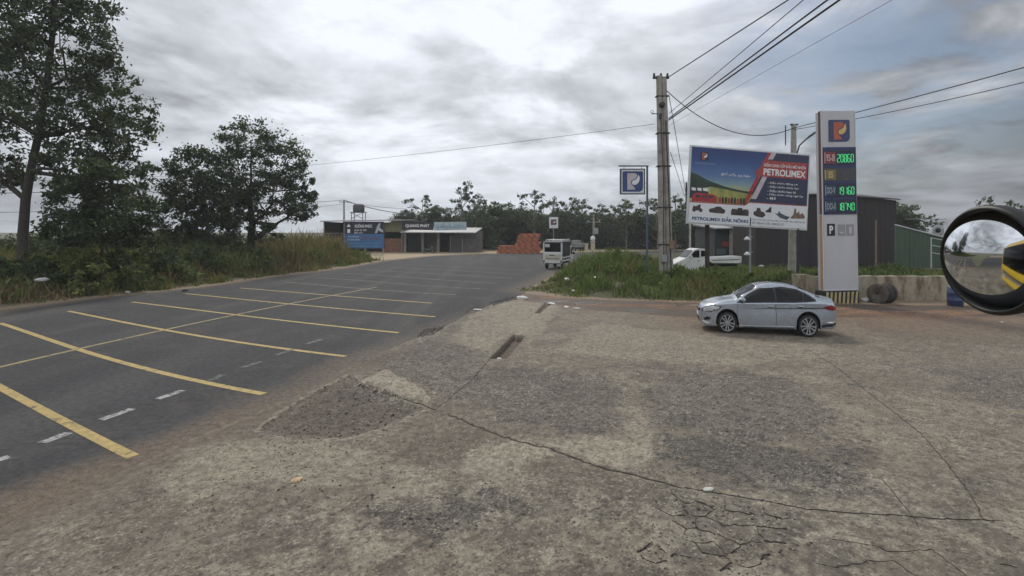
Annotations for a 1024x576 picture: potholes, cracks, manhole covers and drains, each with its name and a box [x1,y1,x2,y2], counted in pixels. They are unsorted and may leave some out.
crack [357,350,1002,571]
crack [817,539,1016,576]
